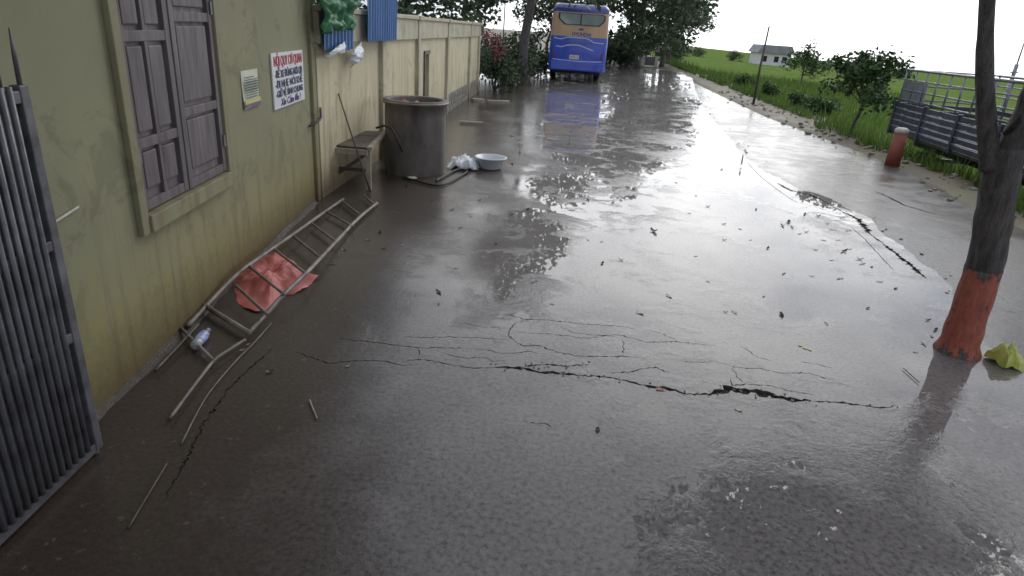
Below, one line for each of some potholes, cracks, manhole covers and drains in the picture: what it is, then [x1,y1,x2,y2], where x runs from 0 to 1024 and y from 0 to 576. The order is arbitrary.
crack [296,314,899,409]
crack [744,159,945,278]
crack [164,349,271,500]
